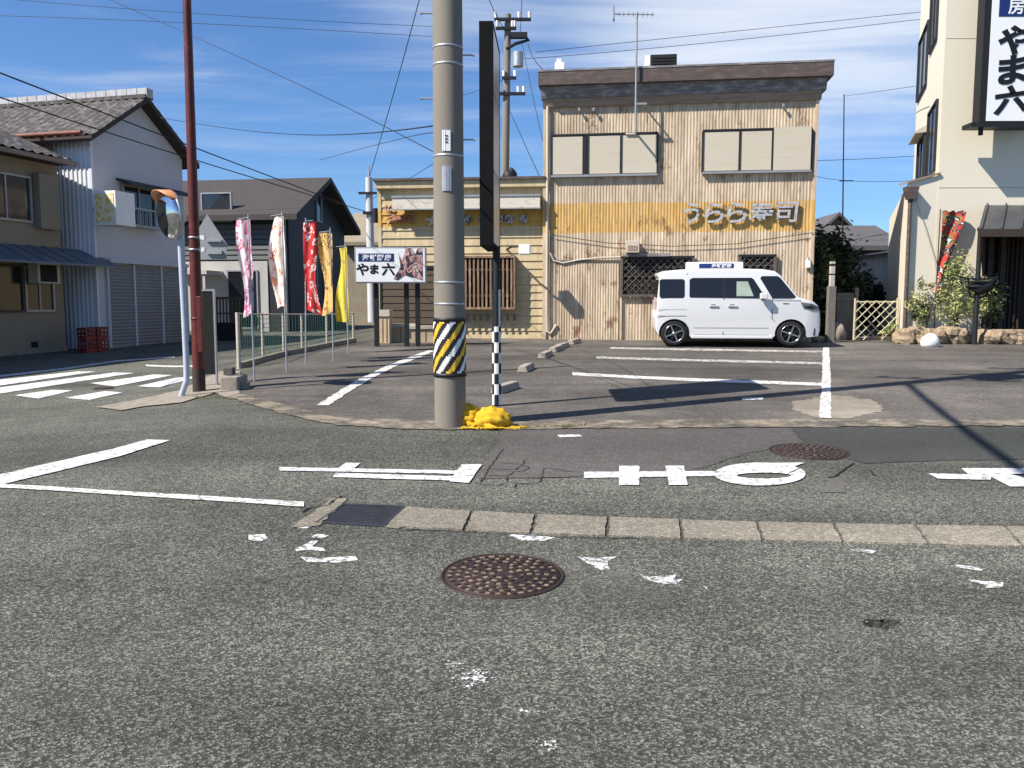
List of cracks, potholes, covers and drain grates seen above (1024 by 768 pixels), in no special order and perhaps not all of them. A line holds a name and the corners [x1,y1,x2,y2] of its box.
drain grate [316,503,406,527]
pothole [860,618,901,630]
manhole cover [769,443,850,460]
manhole cover [440,553,564,599]
crack [480,449,581,488]
